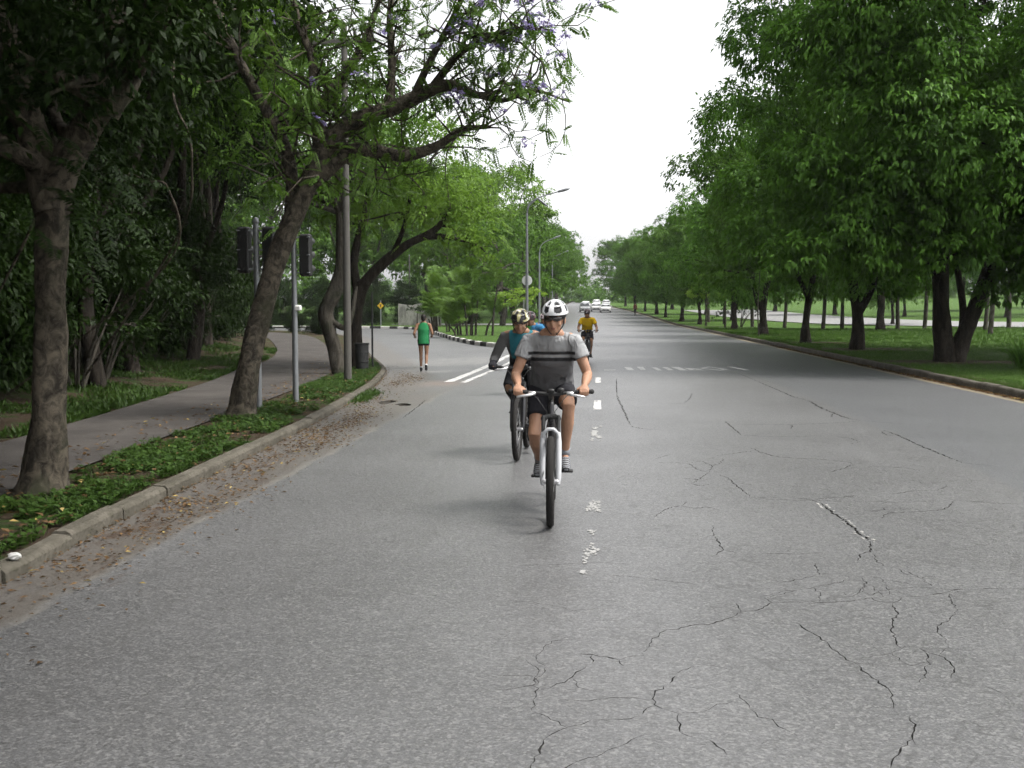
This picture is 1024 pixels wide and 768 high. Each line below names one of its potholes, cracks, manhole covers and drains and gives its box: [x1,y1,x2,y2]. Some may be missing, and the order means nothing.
crack [501,421,1009,768]
